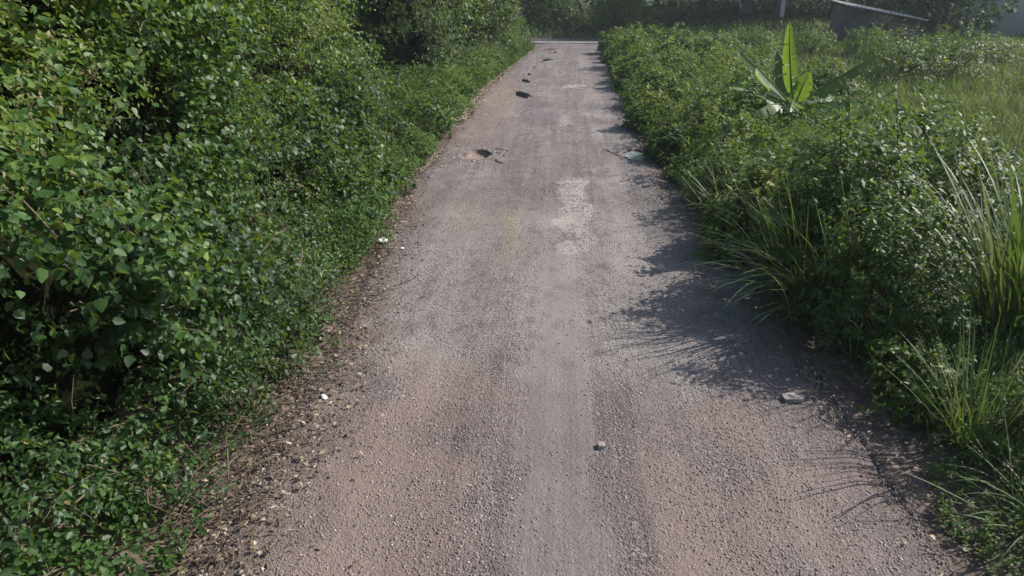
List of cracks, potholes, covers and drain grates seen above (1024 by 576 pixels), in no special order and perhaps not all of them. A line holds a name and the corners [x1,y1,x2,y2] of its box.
pothole [511,90,533,99]
pothole [457,148,495,160]
